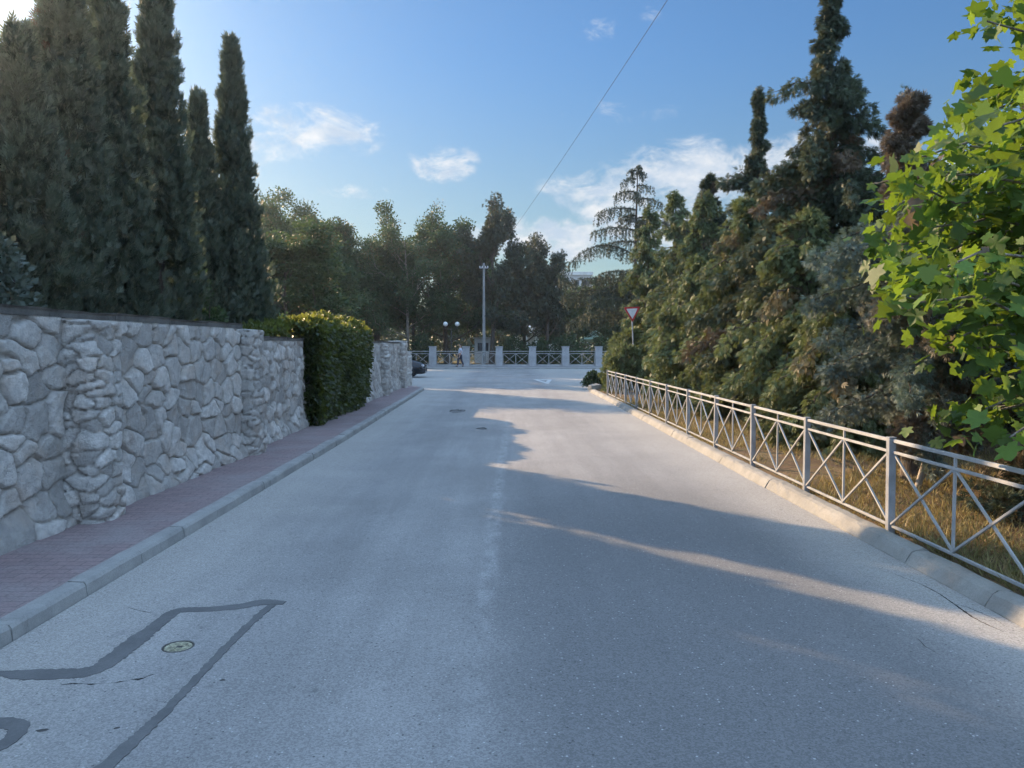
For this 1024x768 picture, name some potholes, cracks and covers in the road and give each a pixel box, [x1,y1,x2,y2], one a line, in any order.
crack [895,574,1005,654]
manhole cover [161,640,195,653]
crack [61,674,153,685]
